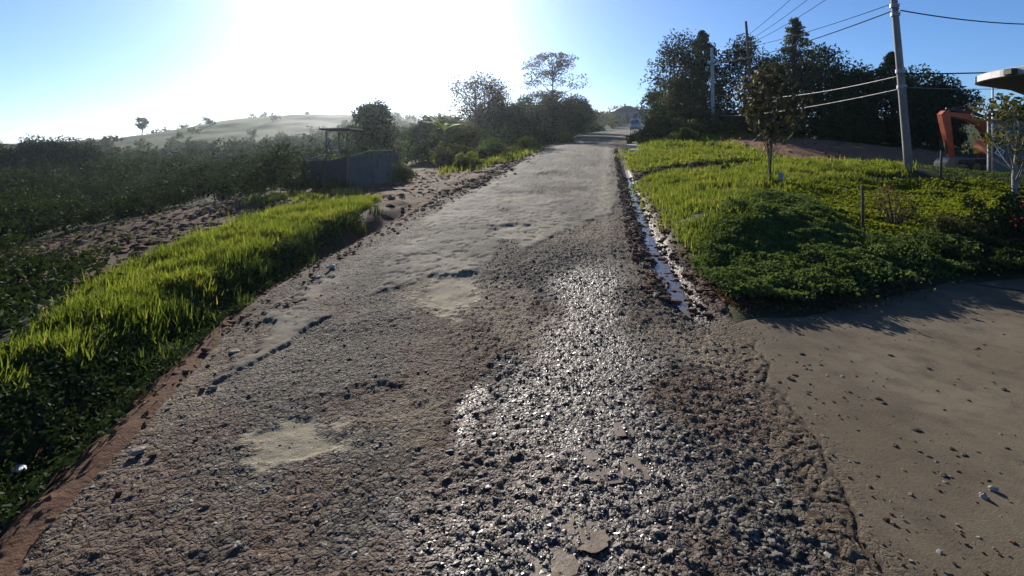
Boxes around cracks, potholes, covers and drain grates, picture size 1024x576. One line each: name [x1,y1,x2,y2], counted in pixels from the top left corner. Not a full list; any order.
pothole [404,265,483,323]
